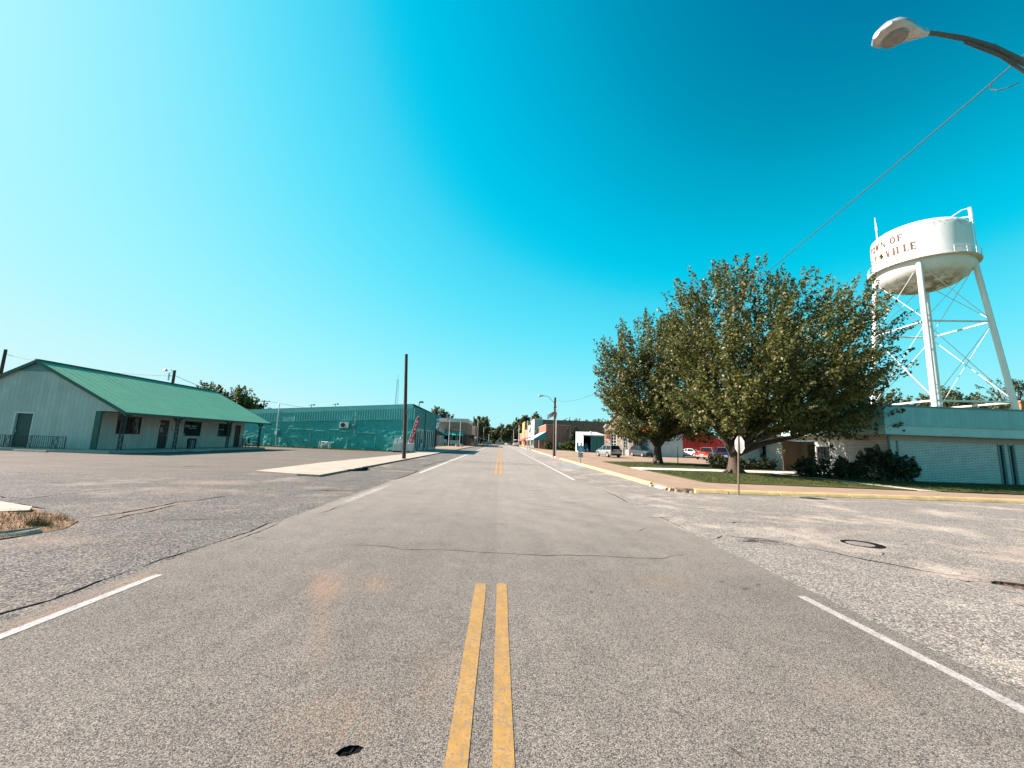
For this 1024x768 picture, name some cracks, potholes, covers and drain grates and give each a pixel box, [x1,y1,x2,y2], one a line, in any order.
pothole [335,745,364,757]
crack [84,495,229,521]
crack [809,548,958,576]
manhole cover [840,540,887,549]
crack [368,545,681,559]
